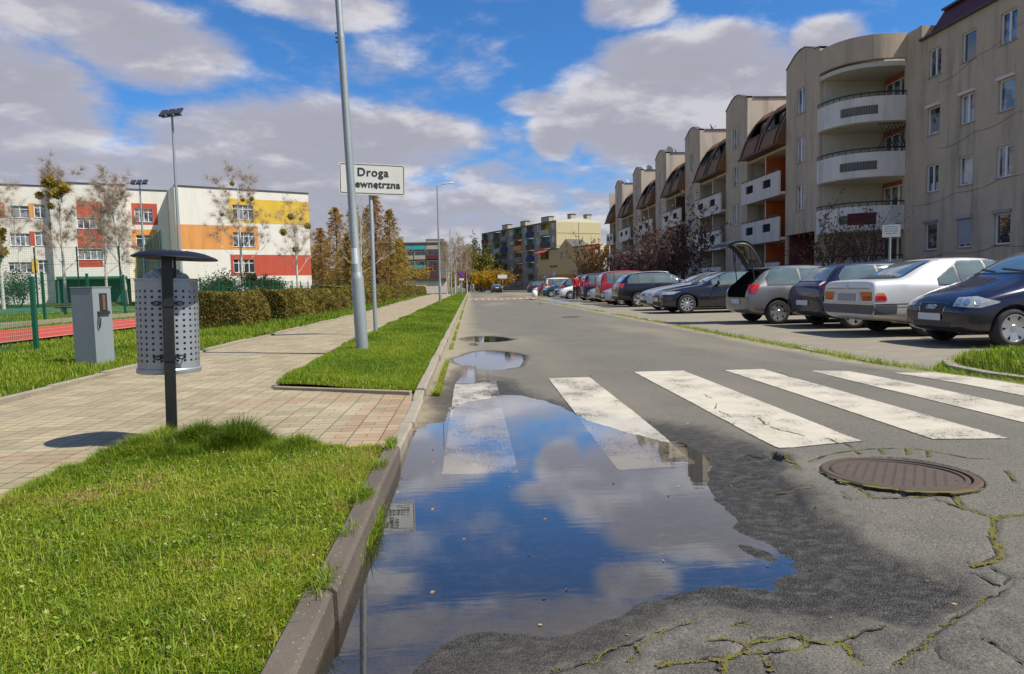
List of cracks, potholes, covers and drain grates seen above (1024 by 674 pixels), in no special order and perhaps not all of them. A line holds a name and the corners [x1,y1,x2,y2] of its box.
manhole cover [820,457,984,497]
pothole [446,350,533,371]
crack [551,395,1024,674]
